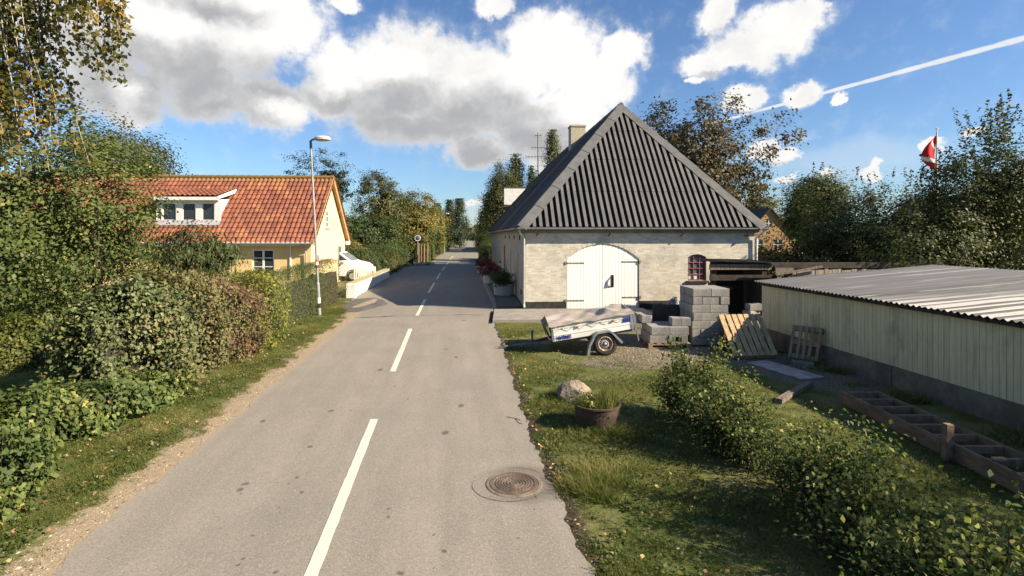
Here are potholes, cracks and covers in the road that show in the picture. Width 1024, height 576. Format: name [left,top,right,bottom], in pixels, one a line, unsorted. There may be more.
manhole cover [485,471,543,498]
